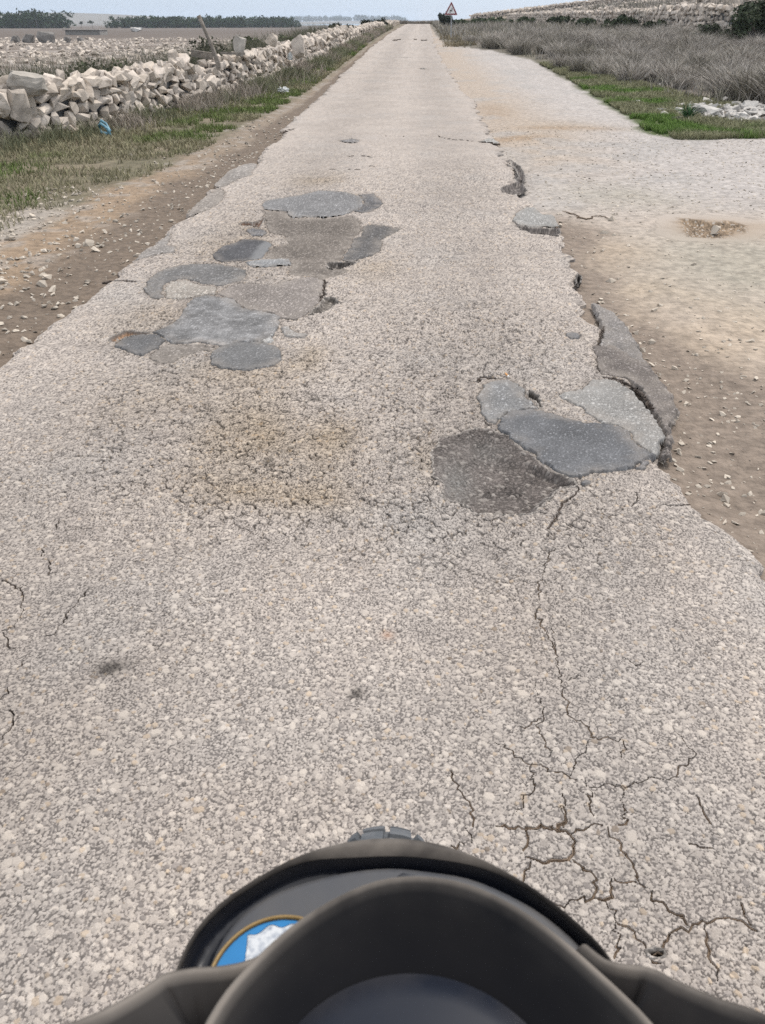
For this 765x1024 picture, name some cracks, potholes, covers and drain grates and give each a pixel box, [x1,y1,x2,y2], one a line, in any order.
crack [501,551,756,971]
pothole [654,214,765,243]
crack [3,581,24,668]
crack [563,211,607,220]
crack [547,487,596,529]
crack [603,377,654,411]
crack [451,771,475,850]
